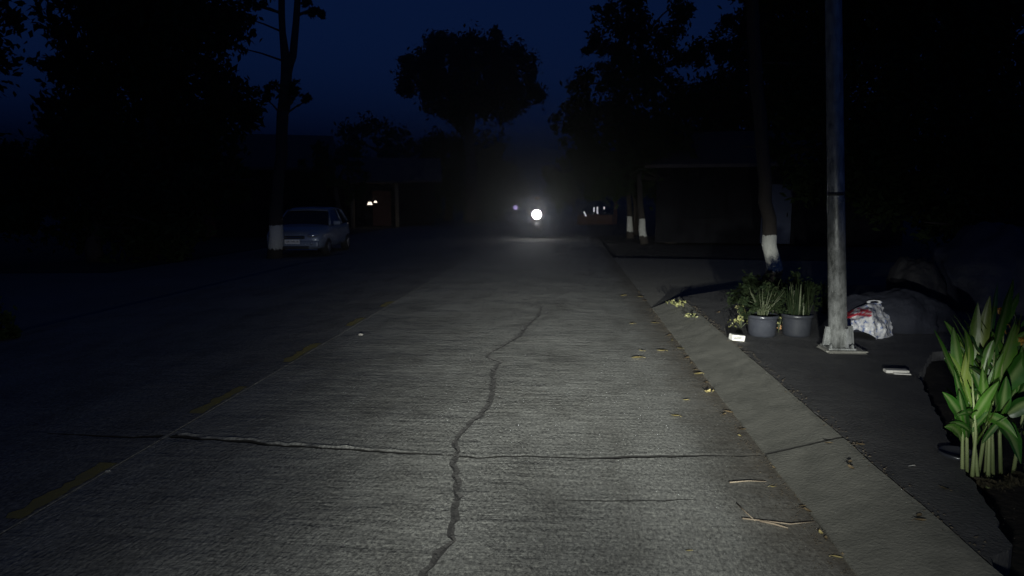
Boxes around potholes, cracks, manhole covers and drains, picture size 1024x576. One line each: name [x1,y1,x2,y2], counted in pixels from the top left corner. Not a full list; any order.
crack [47,306,842,576]
